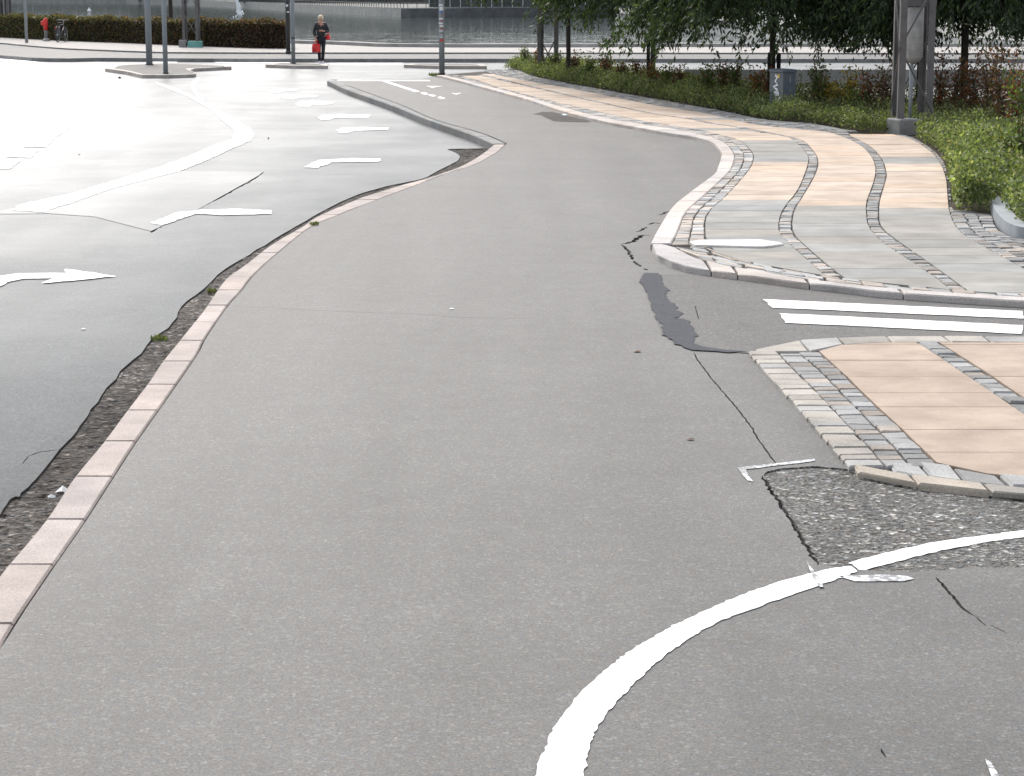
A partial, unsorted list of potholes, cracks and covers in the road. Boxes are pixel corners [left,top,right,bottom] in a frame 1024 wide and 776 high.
crack [621,211,669,270]
crack [936,577,1006,633]
crack [694,353,819,565]
